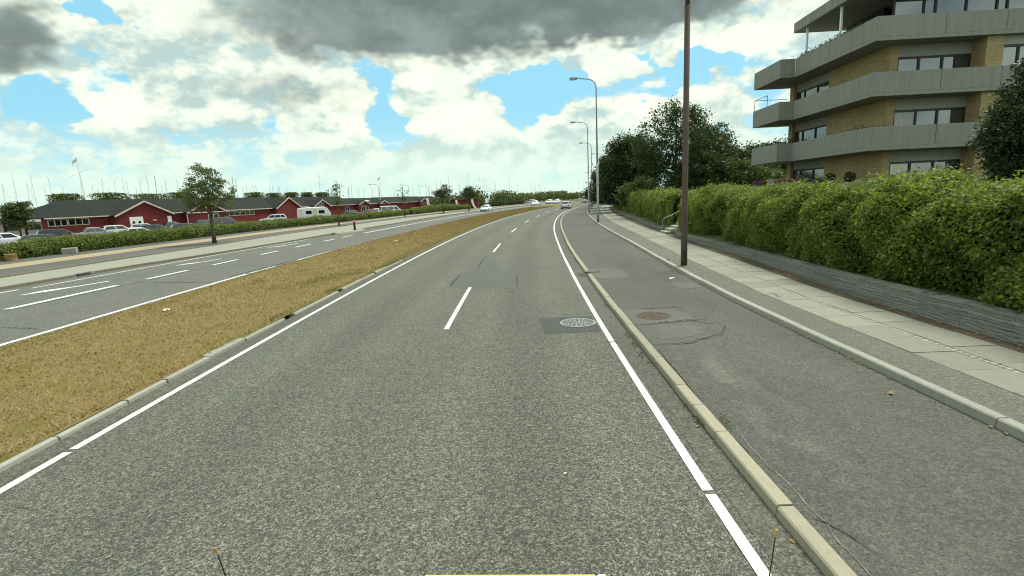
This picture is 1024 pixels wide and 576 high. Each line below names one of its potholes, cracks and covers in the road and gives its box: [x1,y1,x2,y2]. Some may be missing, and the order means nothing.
crack [637,318,726,343]
manhole cover [636,312,671,320]
crack [814,518,883,558]
manhole cover [560,318,596,327]
